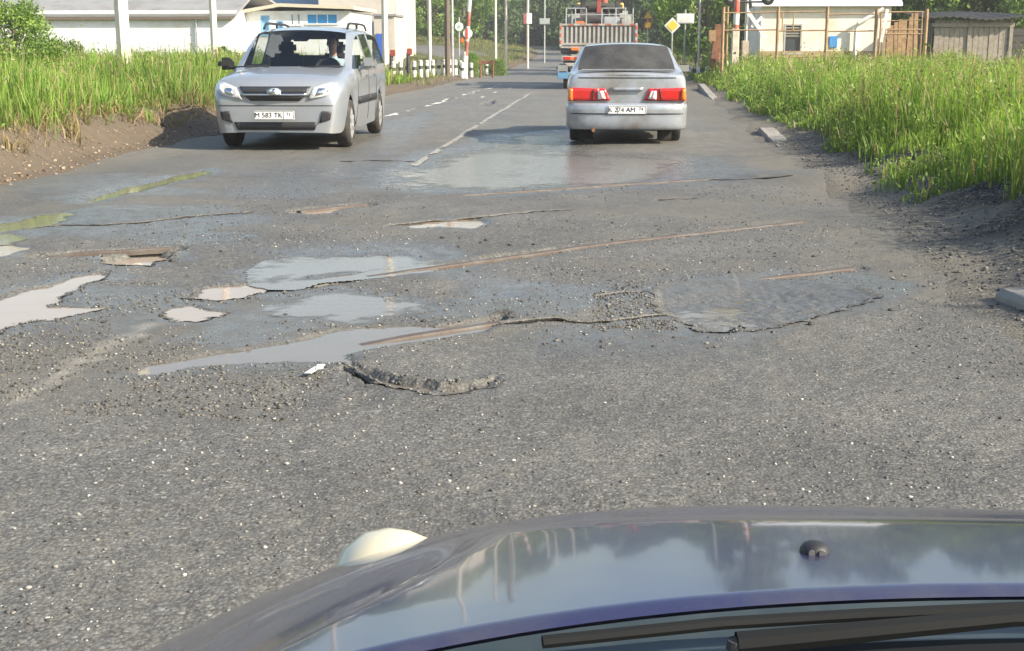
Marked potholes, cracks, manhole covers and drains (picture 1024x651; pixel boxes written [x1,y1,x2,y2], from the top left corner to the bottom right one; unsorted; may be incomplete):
pothole [179,282,272,302]
pothole [162,305,230,322]
pothole [99,251,180,267]
pothole [0,269,113,333]
crack [508,314,667,324]
